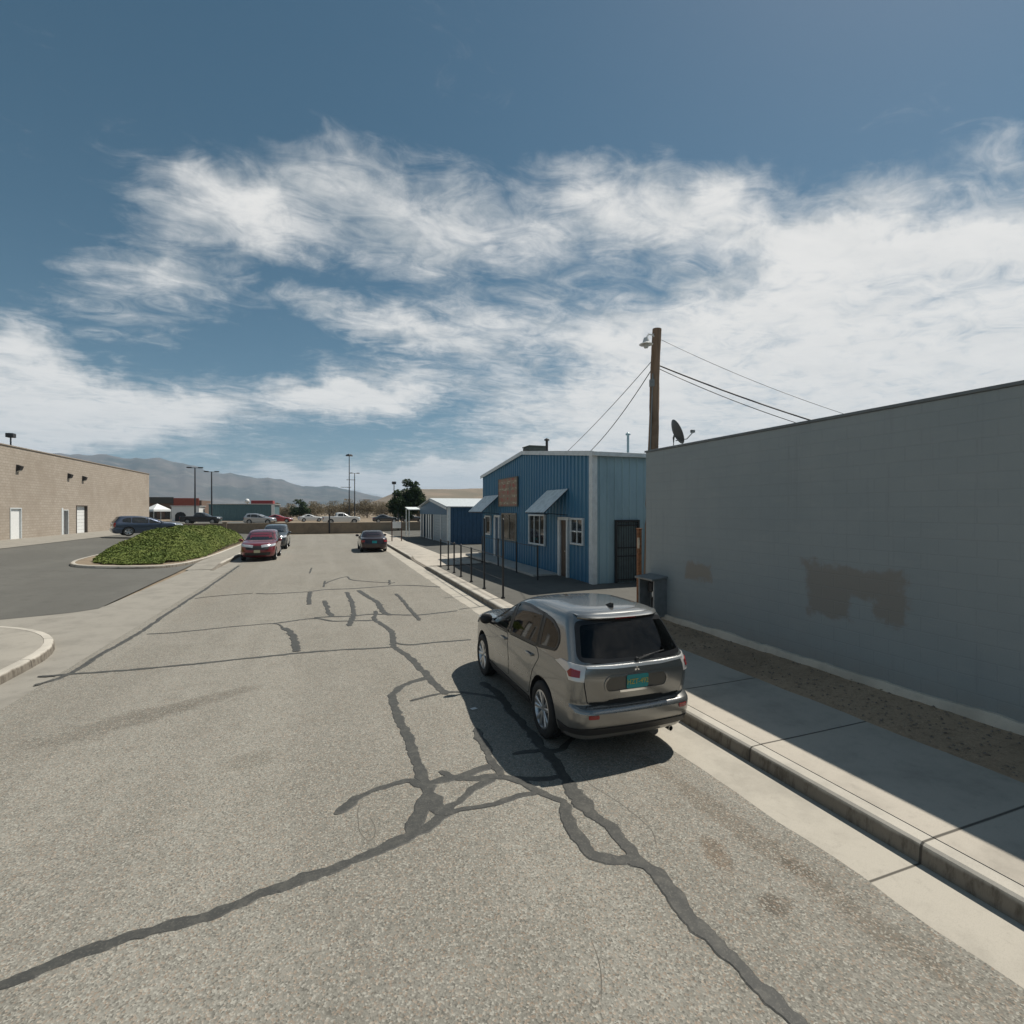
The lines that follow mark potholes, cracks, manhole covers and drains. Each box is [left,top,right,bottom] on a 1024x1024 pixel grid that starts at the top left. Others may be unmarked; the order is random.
crack [357,803,376,841]
crack [591,941,602,999]
crack [577,770,657,846]
